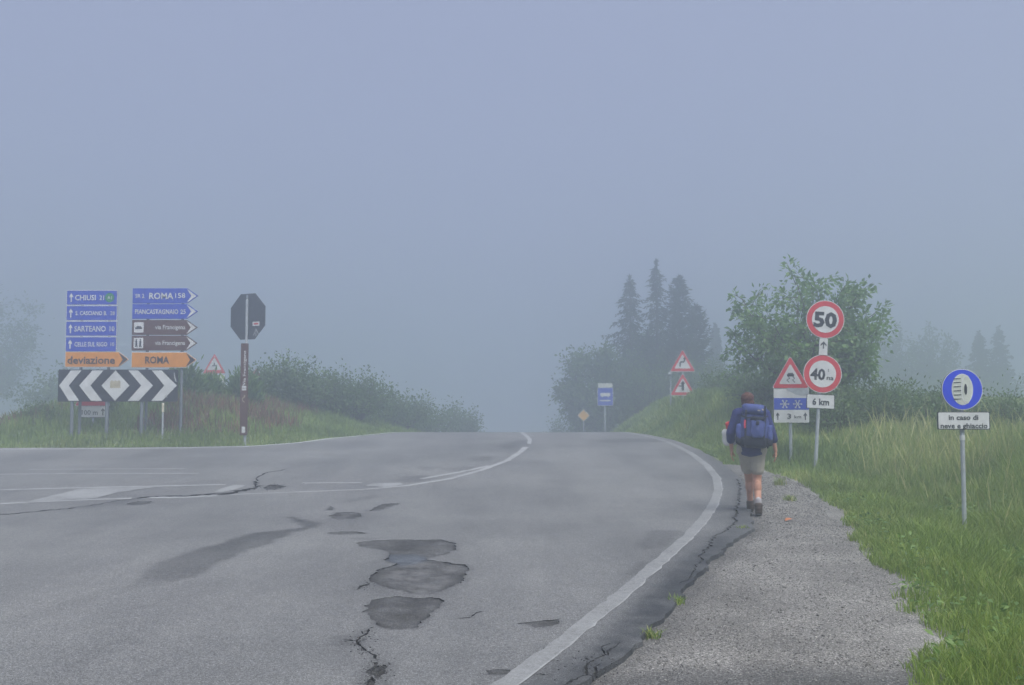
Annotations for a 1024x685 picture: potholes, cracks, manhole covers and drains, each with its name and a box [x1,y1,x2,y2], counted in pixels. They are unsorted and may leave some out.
crack [349,627,377,659]
crack [0,469,286,515]
crack [689,479,741,580]
